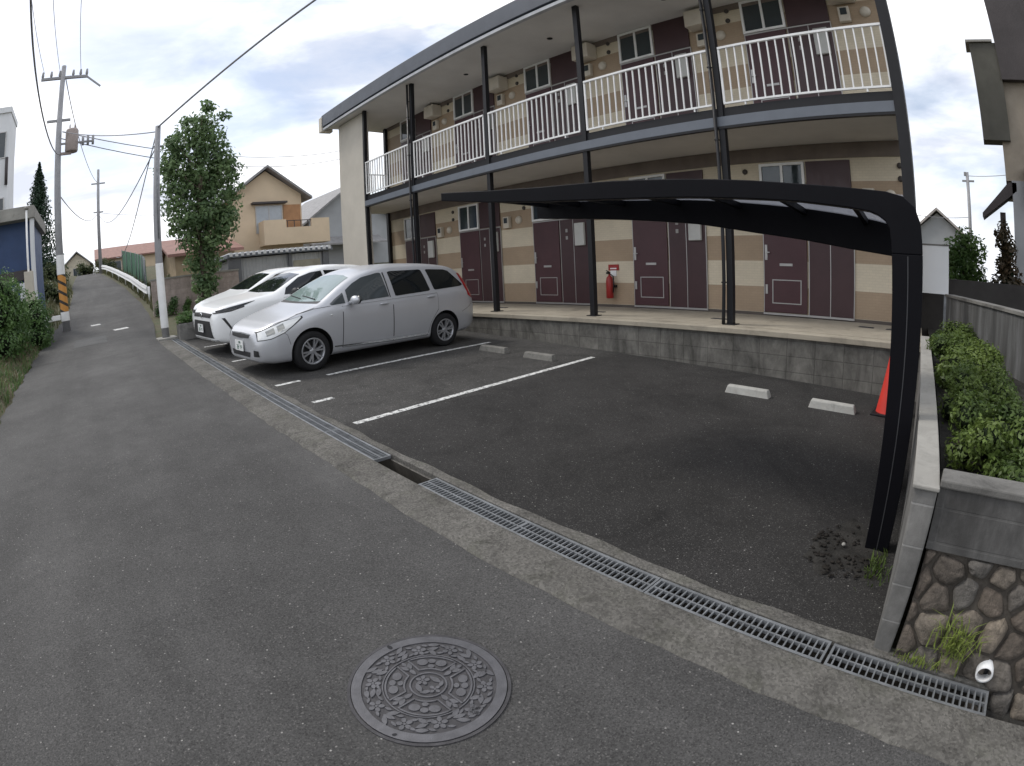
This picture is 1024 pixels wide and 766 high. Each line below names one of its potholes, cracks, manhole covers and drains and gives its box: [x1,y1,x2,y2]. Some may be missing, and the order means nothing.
drain grate [824,643,989,716]
drain grate [510,521,661,593]
drain grate [261,393,301,411]
drain grate [324,429,391,462]
manhole cover [347,635,511,747]
drain grate [223,370,249,382]
drain grate [239,380,272,395]
drain grate [644,578,832,663]
drain grate [288,408,339,432]
drain grate [419,478,528,531]
drain grate [210,362,232,372]
